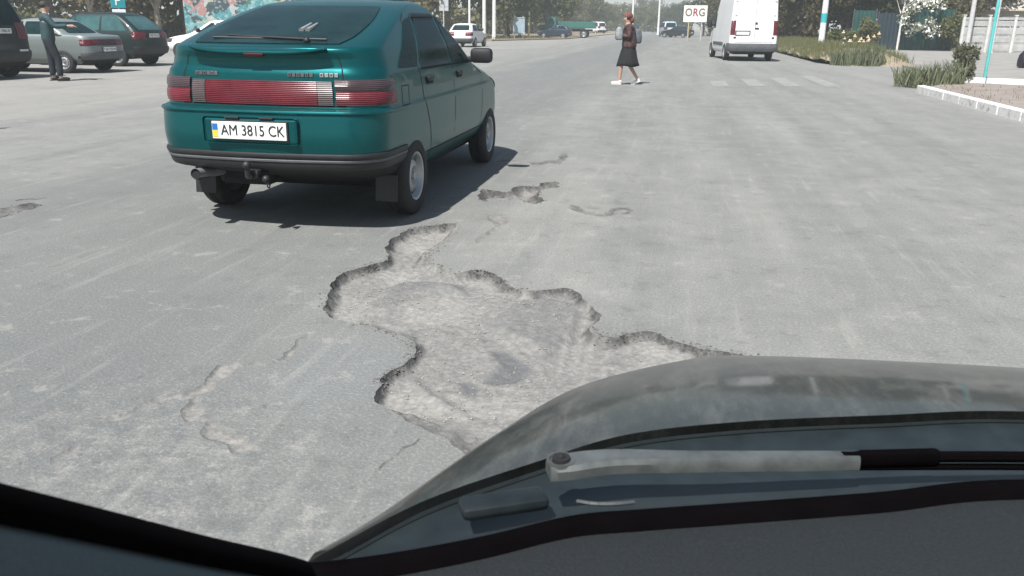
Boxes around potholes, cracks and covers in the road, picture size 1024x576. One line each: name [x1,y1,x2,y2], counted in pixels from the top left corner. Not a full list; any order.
crack [378,439,420,470]
pothole [475,212,510,243]
pothole [323,223,745,454]
crack [50,330,319,465]
pothole [568,204,634,217]
pothole [478,182,560,204]
pothole [0,203,43,218]
